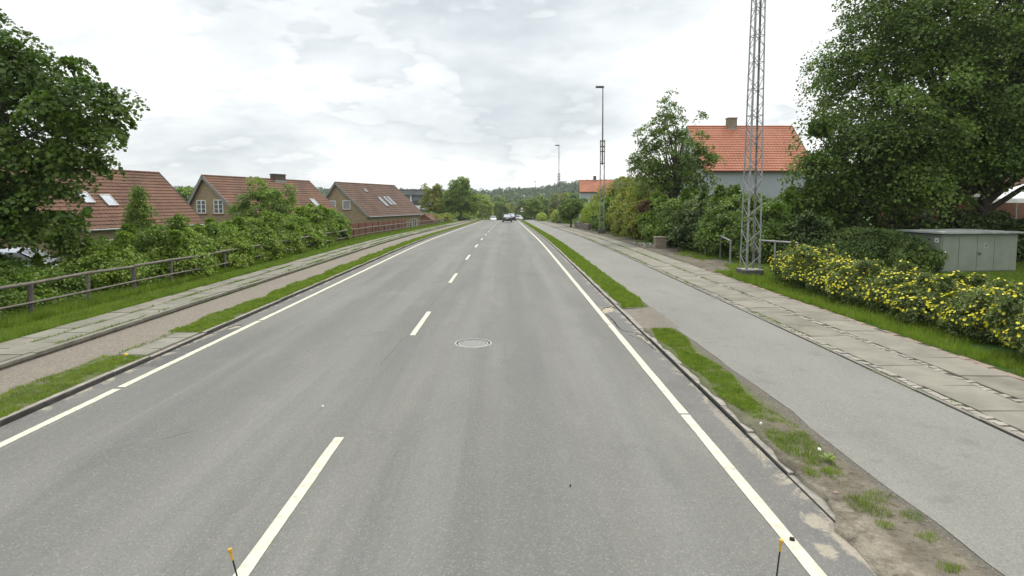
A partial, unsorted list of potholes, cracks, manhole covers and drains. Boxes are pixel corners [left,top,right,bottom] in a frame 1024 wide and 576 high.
manhole cover [455,339,492,348]
